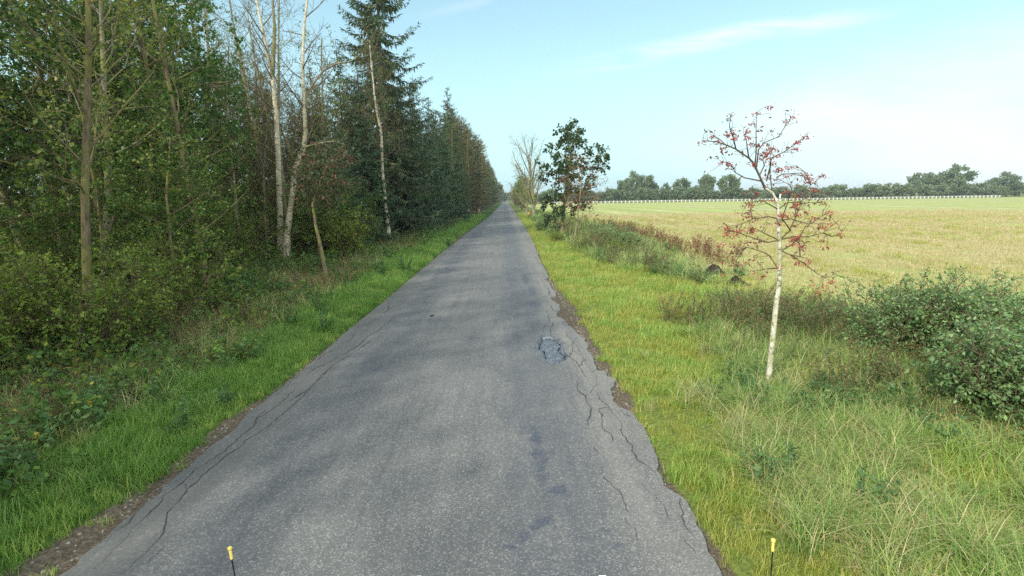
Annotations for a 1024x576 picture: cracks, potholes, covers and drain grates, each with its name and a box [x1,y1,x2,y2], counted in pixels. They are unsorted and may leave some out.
pothole [534,336,569,365]
crack [543,279,696,554]
